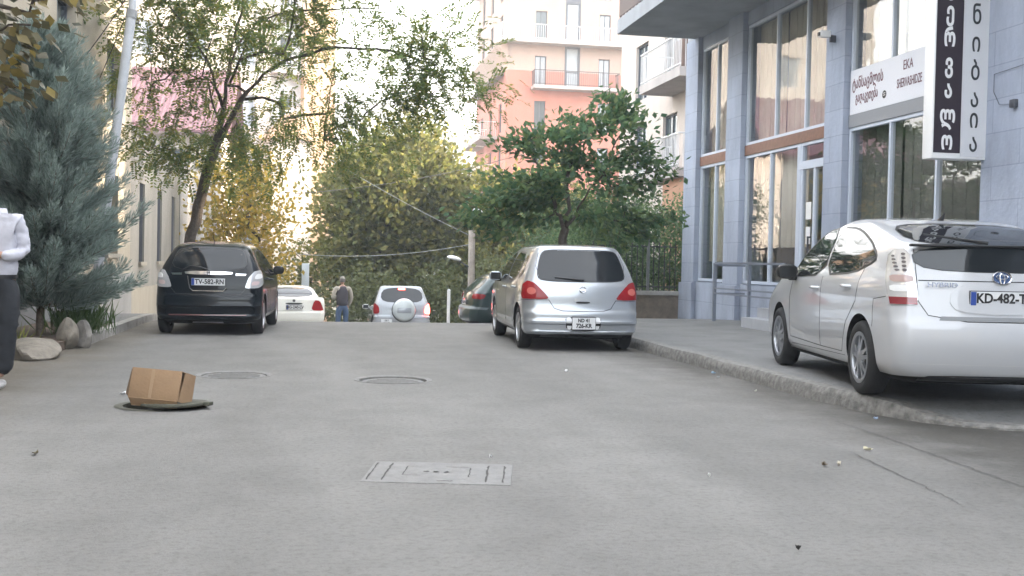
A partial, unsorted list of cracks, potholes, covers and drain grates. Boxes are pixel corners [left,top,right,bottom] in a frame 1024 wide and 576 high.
manhole cover [114,402,202,411]
manhole cover [354,375,432,384]
manhole cover [360,461,513,486]
manhole cover [196,371,272,379]
crack [839,422,1024,503]
manhole cover [141,399,213,408]
